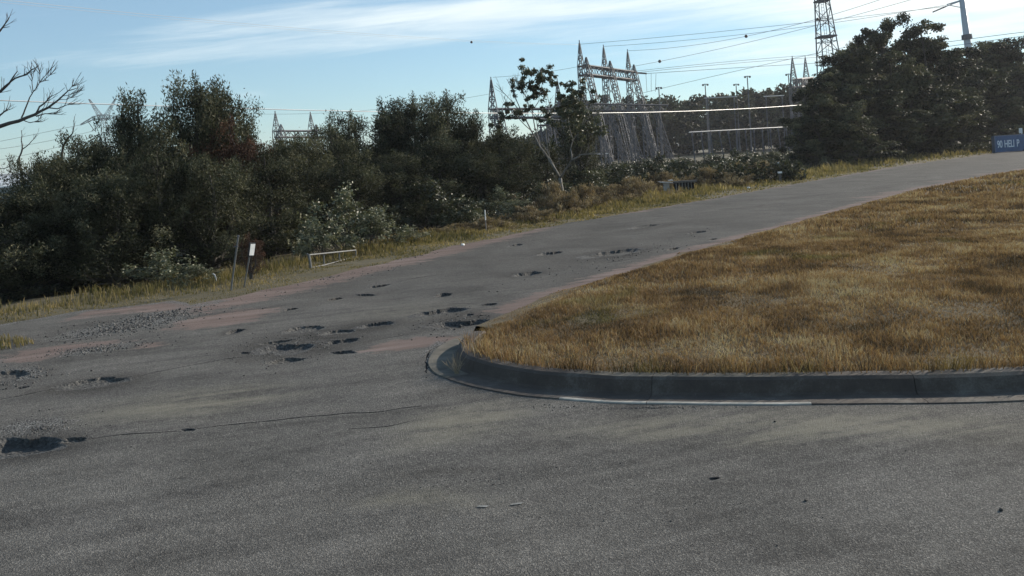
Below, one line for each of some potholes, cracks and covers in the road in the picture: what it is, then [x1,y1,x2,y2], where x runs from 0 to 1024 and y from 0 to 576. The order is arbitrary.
crack [198,406,417,429]
pothole [422,319,491,330]
pothole [573,248,647,260]
pothole [247,343,317,355]
pothole [351,321,396,329]
pothole [321,338,361,346]
pothole [0,370,32,383]
pothole [407,307,472,318]
pothole [0,437,68,459]
pothole [49,376,135,391]
